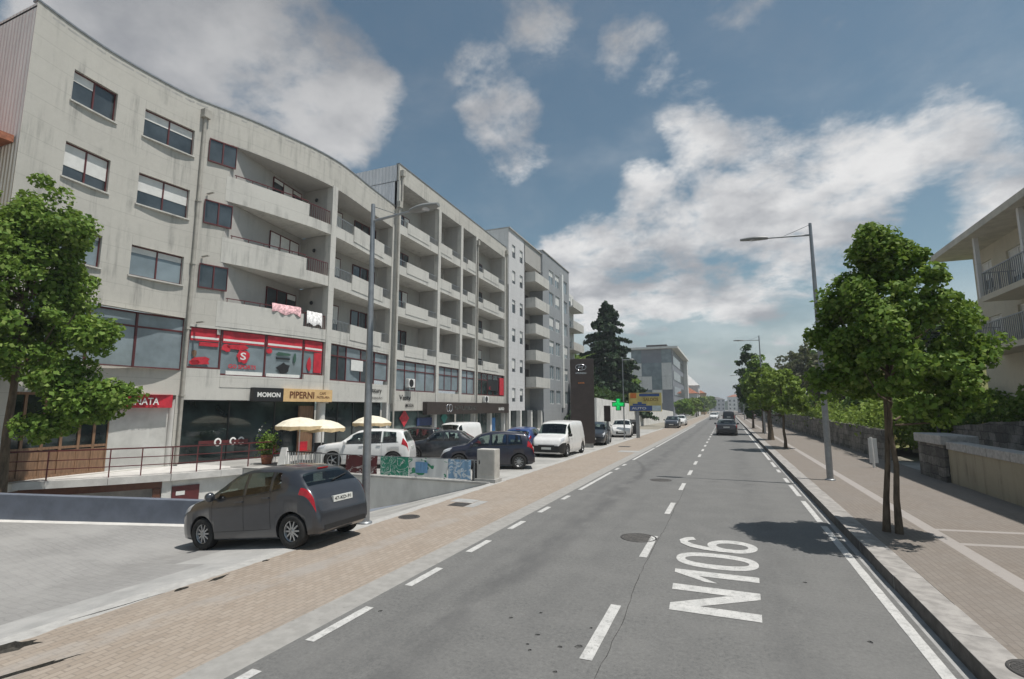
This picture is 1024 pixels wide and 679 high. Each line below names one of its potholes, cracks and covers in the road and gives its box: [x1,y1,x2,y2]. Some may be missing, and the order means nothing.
manhole cover [1005,659,1024,678]
manhole cover [620,533,657,543]
